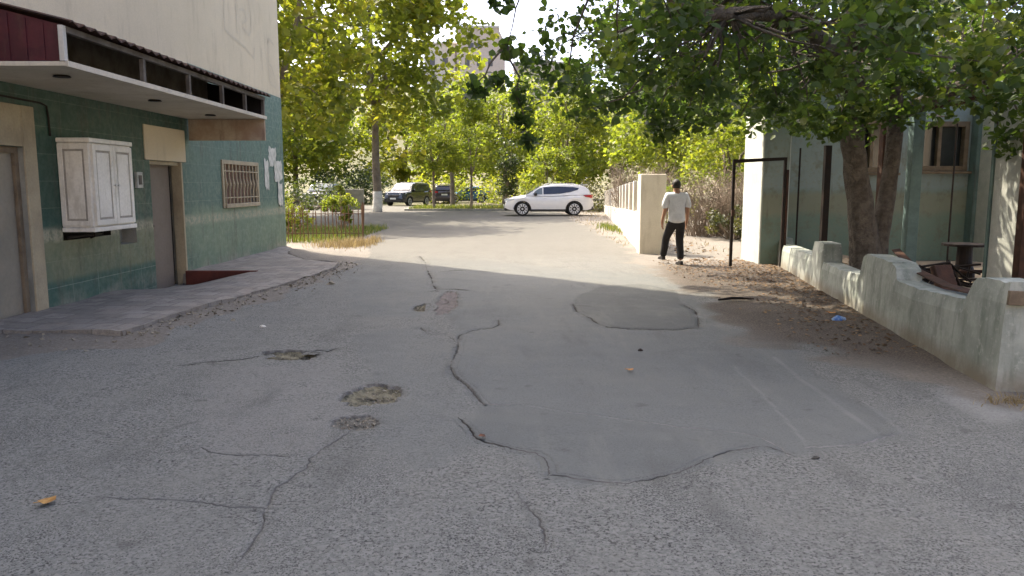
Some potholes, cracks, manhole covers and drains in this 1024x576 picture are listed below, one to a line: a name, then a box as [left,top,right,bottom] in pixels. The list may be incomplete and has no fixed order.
crack [91,429,356,574]
pothole [323,413,386,435]
crack [416,256,472,290]
pothole [332,382,408,409]
crack [415,319,913,553]
